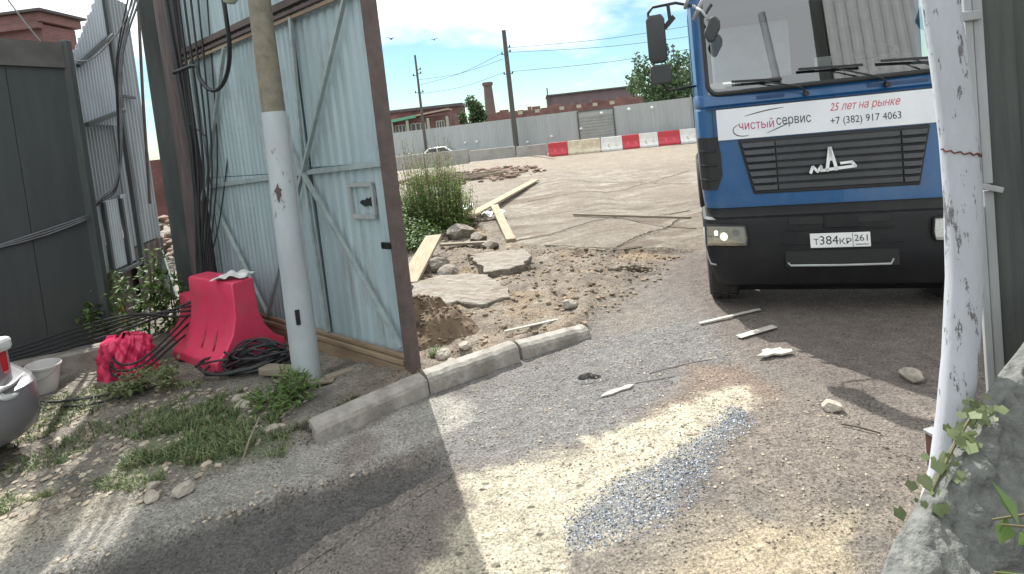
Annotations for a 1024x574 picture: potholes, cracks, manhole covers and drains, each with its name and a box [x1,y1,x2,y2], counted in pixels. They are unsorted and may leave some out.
pothole [584,263,661,275]
crack [544,219,681,250]
